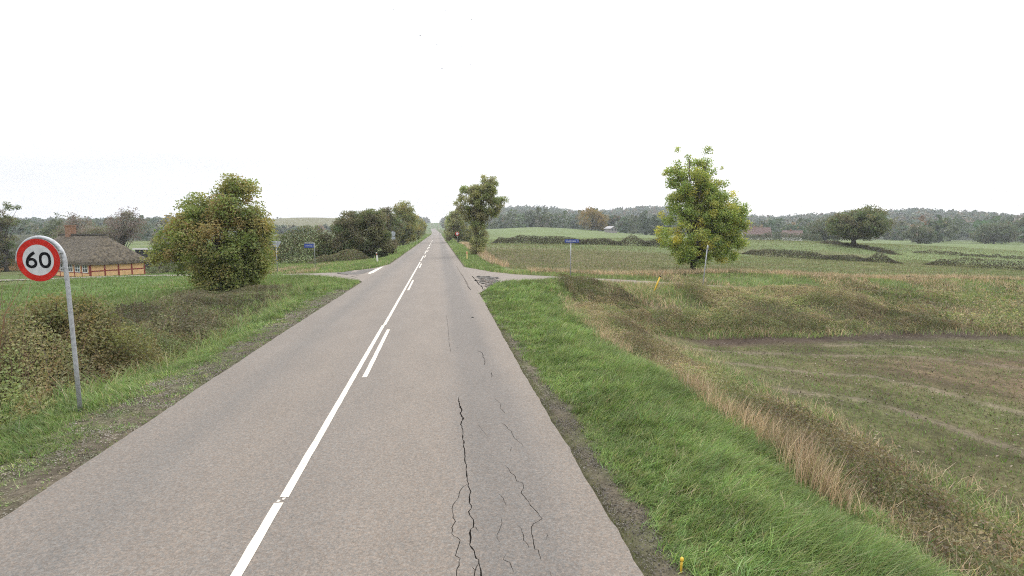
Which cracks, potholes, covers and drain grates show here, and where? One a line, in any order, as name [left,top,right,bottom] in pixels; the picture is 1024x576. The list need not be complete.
crack [451,398,485,576]
crack [497,405,551,574]
